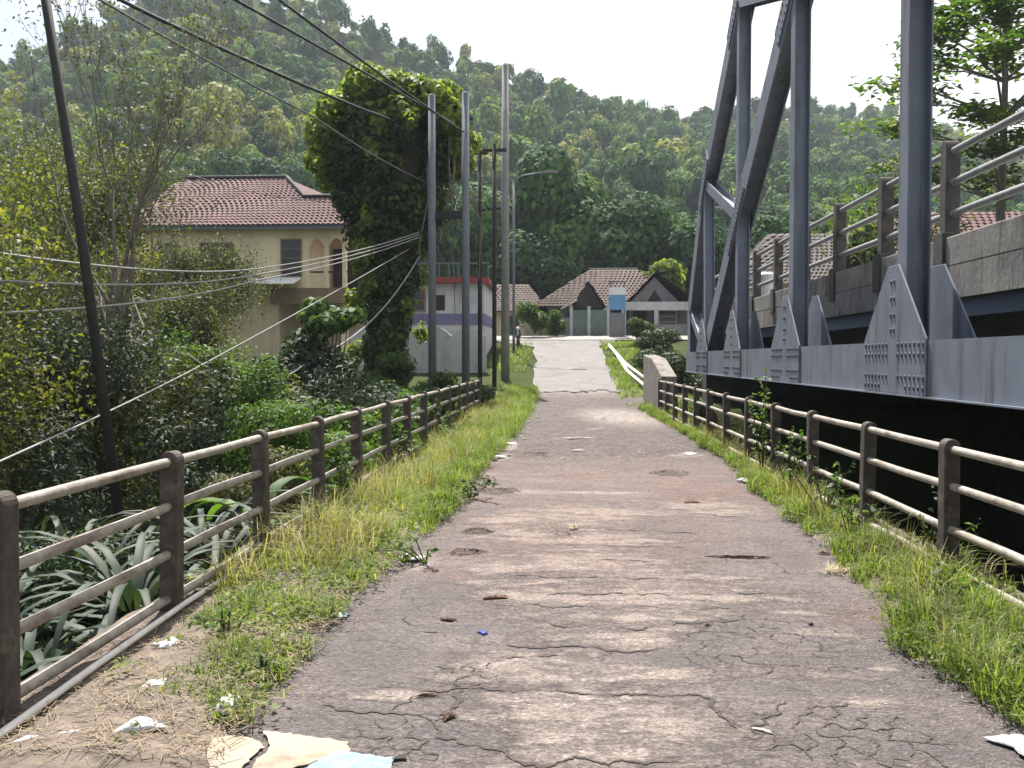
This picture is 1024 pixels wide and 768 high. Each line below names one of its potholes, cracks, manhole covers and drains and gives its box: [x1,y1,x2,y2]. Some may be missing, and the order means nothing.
pothole [461,527,497,535]
pothole [480,487,521,495]
crack [317,528,956,768]
pothole [449,548,487,557]
